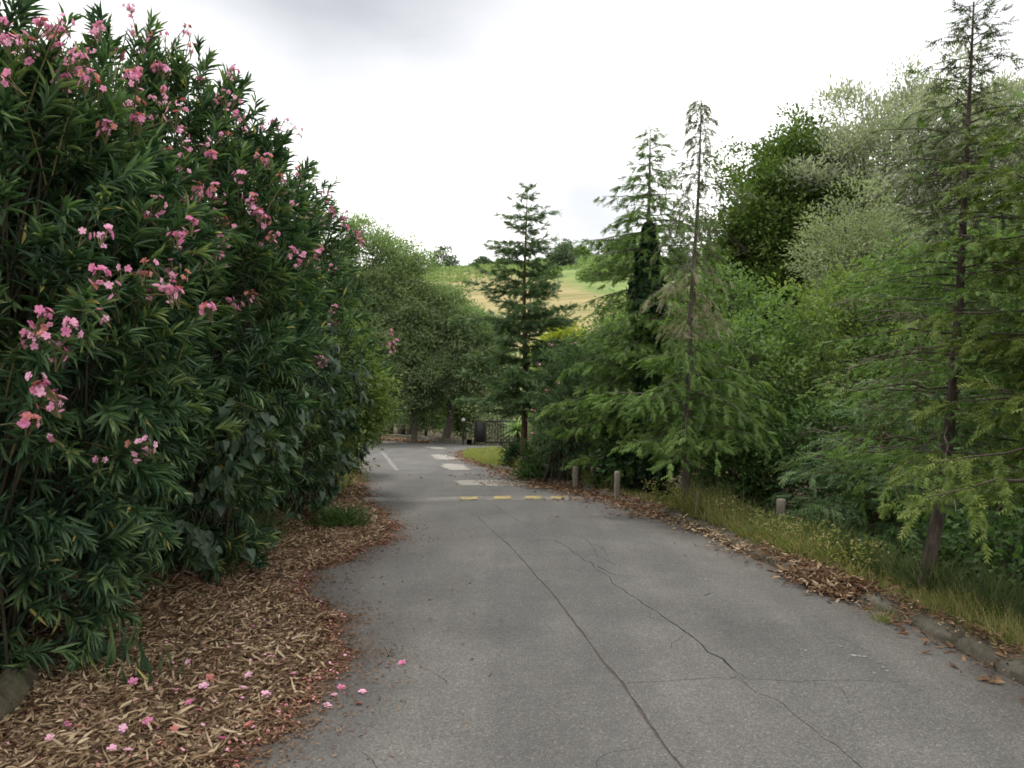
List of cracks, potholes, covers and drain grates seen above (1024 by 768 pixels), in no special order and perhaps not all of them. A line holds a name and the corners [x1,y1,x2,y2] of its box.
crack [384,507,946,768]
